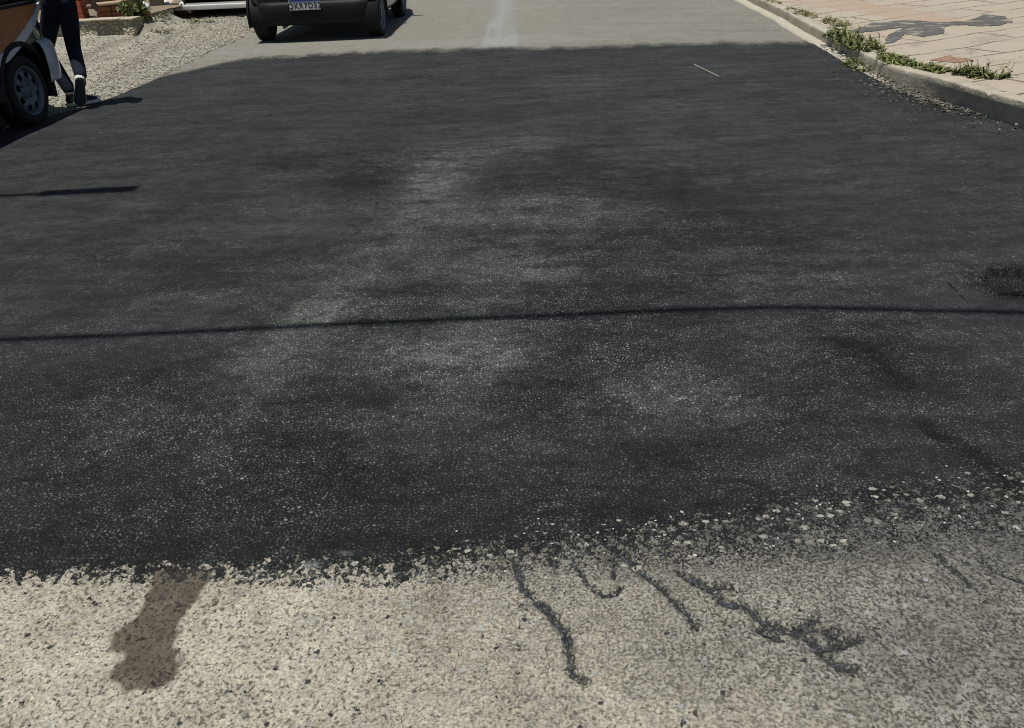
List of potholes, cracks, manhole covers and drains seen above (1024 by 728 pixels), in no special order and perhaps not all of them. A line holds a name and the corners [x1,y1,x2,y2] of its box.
crack [935,555,1024,585]
crack [514,567,580,678]
crack [577,555,857,673]
